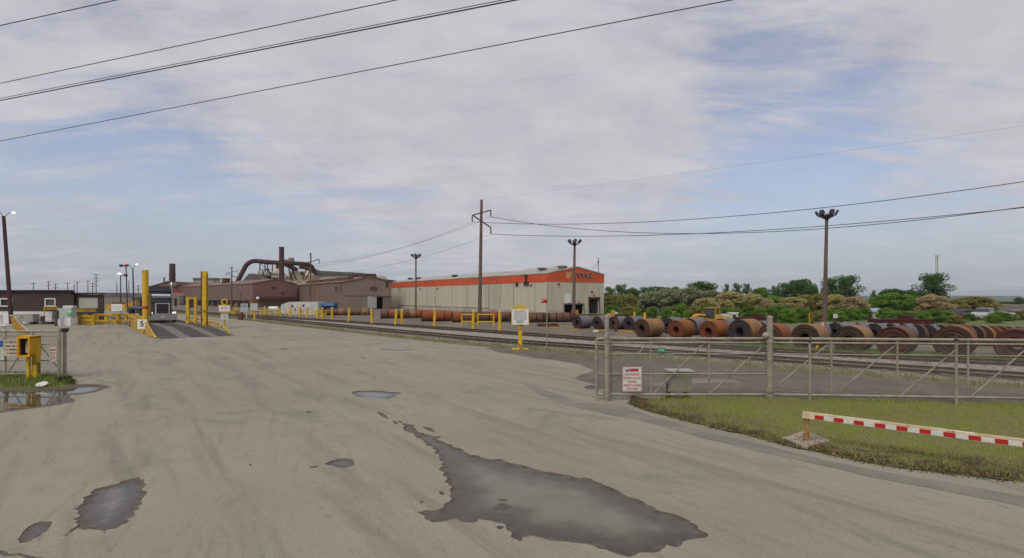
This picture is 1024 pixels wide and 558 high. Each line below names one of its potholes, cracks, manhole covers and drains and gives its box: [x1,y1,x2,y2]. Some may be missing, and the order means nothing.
pothole [402,423,708,557]
pothole [325,458,355,468]
pothole [18,521,52,543]
pothole [352,390,401,399]
pothole [64,477,147,536]
